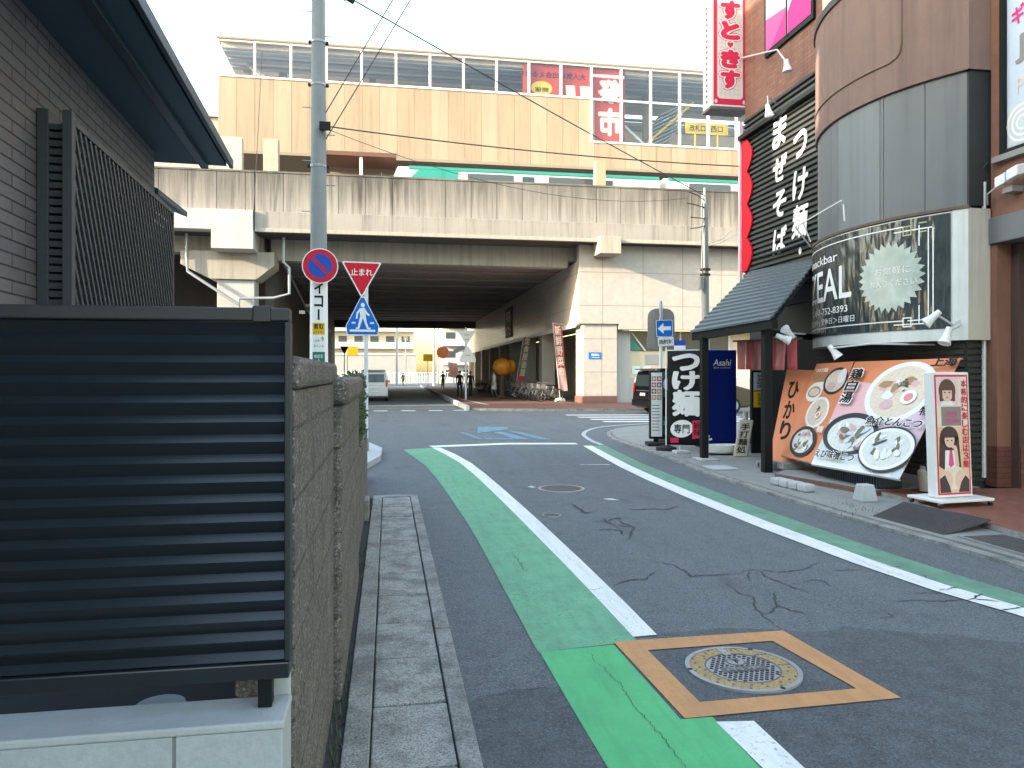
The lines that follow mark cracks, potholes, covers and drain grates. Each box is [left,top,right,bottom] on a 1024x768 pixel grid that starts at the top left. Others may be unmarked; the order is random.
crack [882,575,1023,618]
crack [588,649,686,767]
crack [572,504,678,540]
manhole cover [685,647,803,694]
manhole cover [538,485,585,493]
crack [589,560,862,630]
